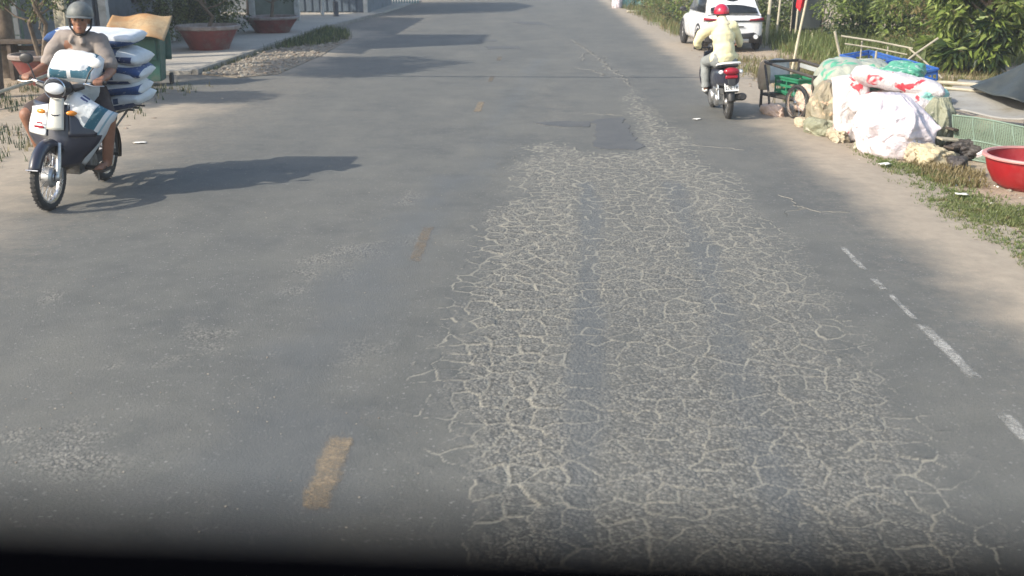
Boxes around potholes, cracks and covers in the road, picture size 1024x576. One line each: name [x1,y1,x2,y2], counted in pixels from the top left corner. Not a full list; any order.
crack [359,40,1024,543]
